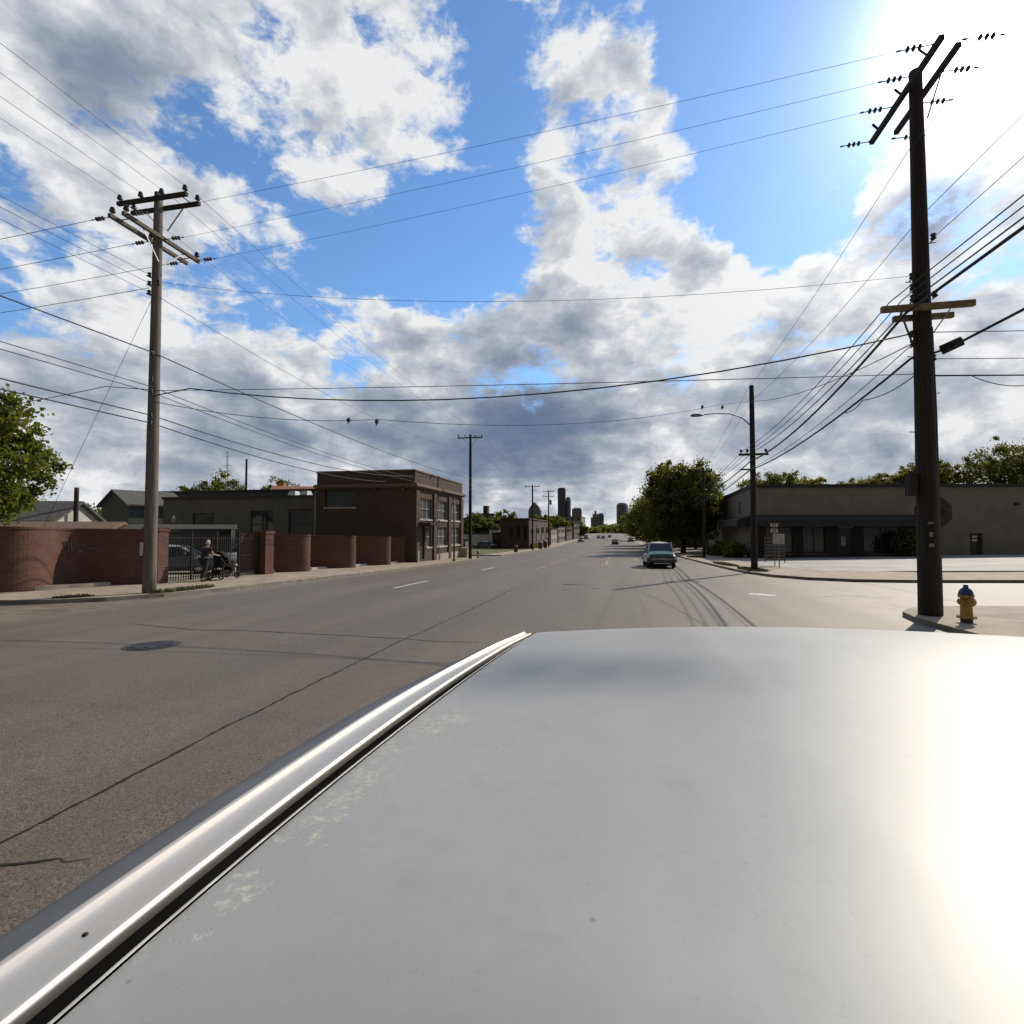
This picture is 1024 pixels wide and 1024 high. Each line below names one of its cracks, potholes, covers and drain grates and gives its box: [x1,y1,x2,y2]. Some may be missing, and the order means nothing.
crack [0,587,516,866]
manhole cover [121,640,182,651]
